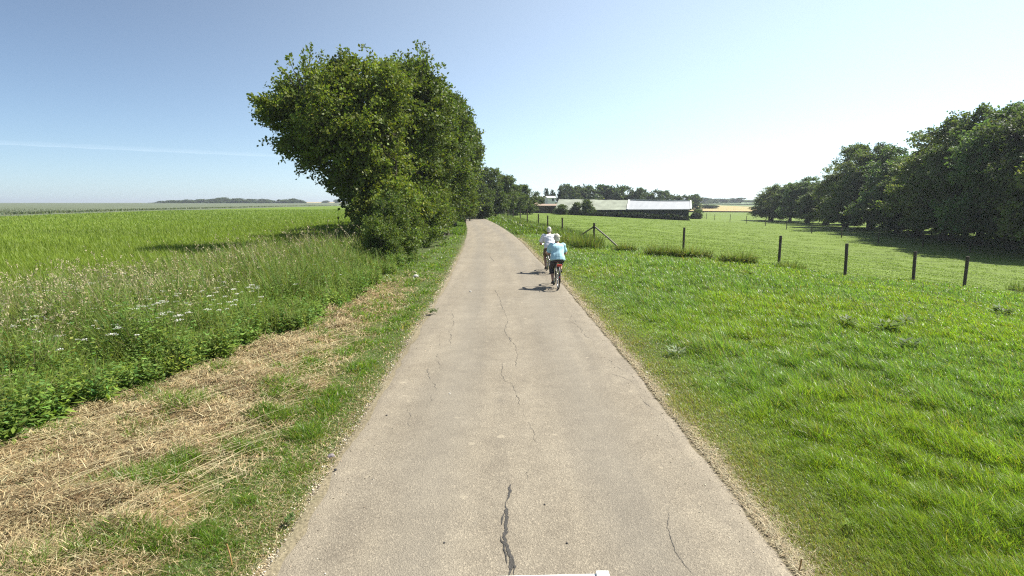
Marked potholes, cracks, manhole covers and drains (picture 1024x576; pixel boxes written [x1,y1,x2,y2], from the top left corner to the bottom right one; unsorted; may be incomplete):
crack [501,472,528,575]
